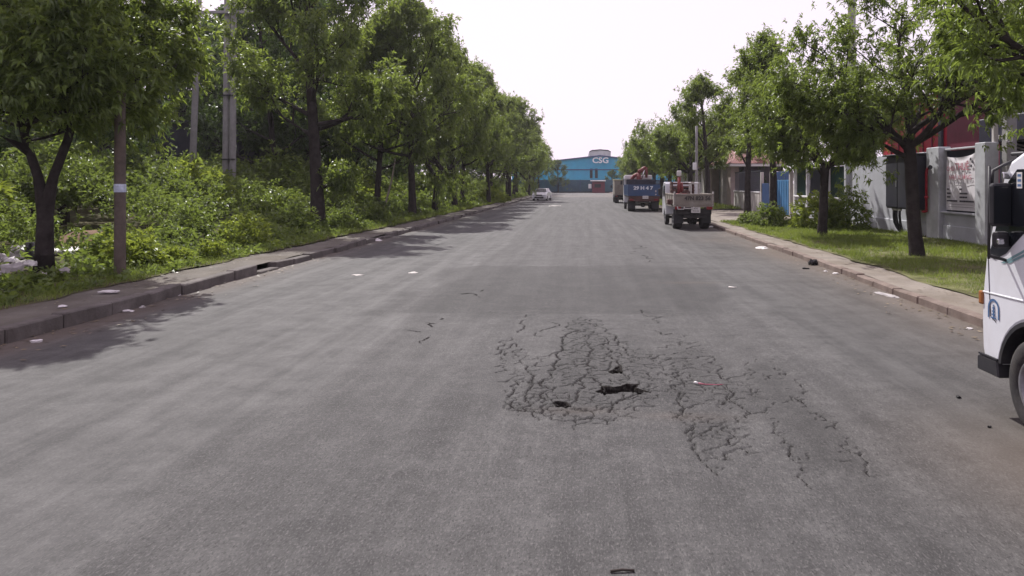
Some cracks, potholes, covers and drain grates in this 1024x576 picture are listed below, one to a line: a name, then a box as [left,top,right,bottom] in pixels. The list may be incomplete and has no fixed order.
pothole [595,384,648,396]
crack [651,339,870,489]
crack [497,315,659,423]
